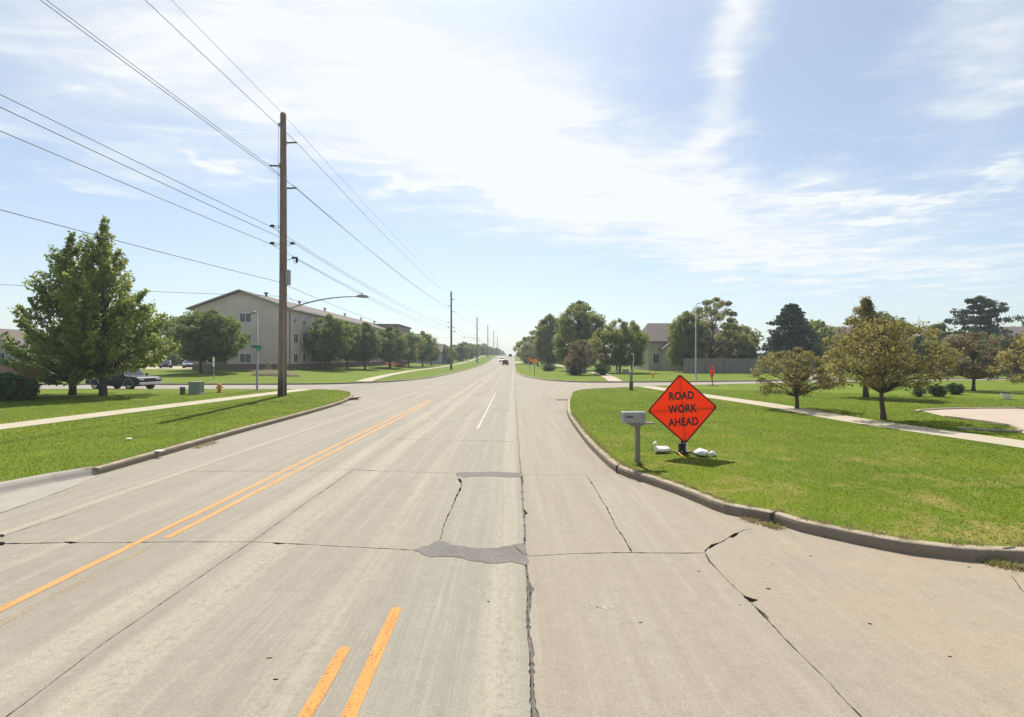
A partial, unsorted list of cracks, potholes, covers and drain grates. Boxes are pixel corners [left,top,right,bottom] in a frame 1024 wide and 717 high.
crack [705,528,862,717]
crack [587,476,632,552]
crack [439,474,462,541]
